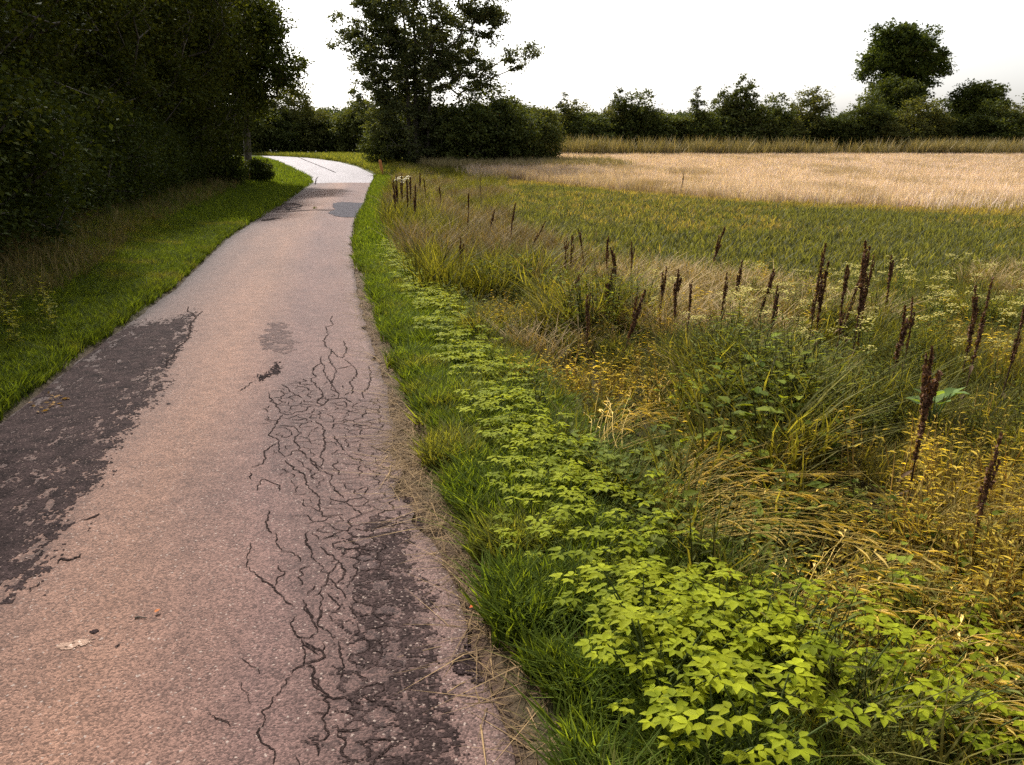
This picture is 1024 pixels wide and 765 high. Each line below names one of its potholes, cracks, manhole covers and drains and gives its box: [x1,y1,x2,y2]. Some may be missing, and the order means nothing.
pothole [256,361,281,381]
crack [240,316,404,765]
